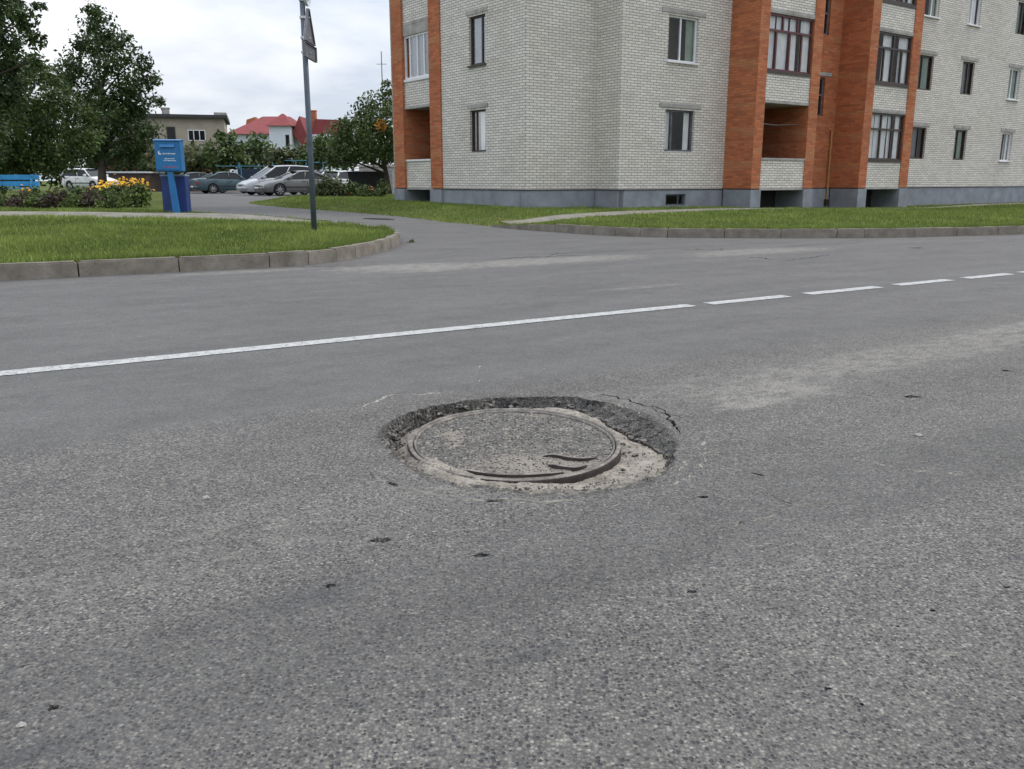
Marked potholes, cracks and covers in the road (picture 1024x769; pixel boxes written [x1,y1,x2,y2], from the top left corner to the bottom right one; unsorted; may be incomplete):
manhole cover [407,408,621,484]
crack [596,393,711,489]
